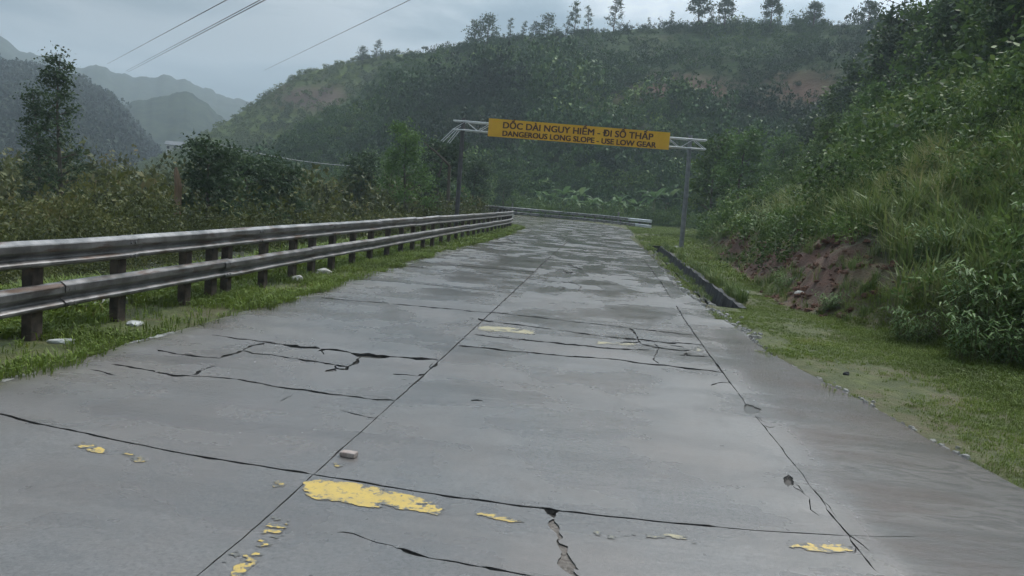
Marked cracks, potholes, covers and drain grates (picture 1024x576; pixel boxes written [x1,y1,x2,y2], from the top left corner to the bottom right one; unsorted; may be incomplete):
crack [94,335,438,418]
crack [326,298,876,571]
pothole [744,404,761,414]
